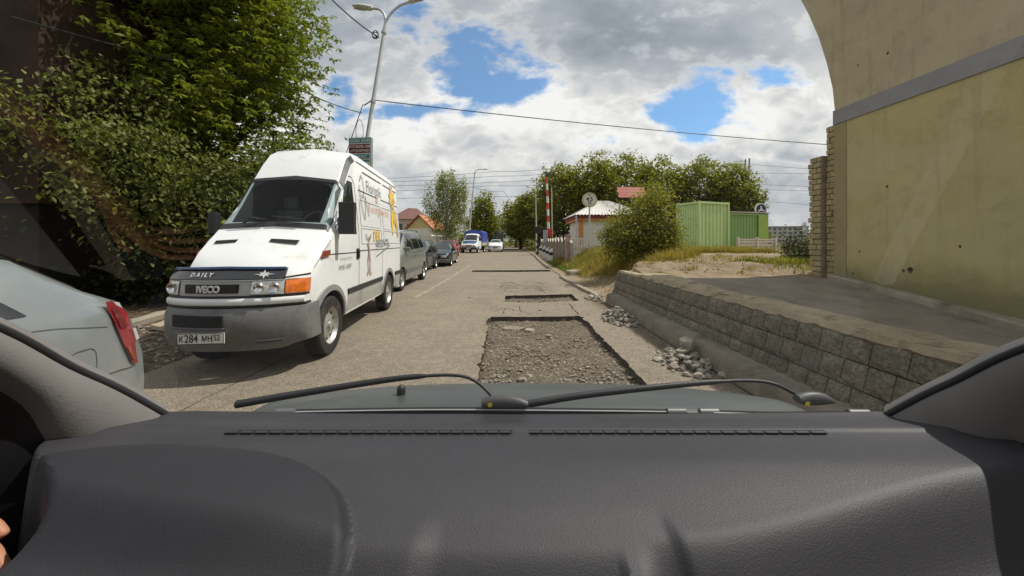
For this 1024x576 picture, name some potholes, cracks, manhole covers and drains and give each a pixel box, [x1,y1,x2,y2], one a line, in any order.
pothole [505,294,579,303]
pothole [476,316,647,385]
crack [491,281,545,315]
